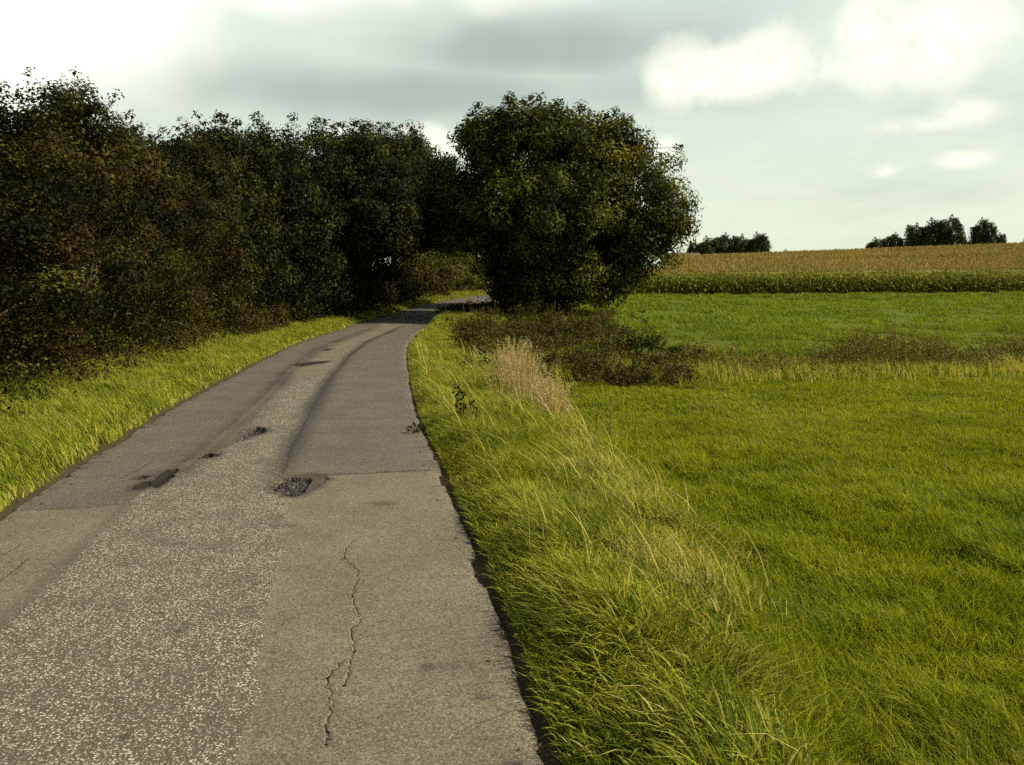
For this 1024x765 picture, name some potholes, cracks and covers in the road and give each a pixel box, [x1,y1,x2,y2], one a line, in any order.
pothole [126,467,185,491]
crack [321,540,366,745]
crack [0,543,30,581]
pothole [233,426,271,442]
pothole [264,473,335,498]
